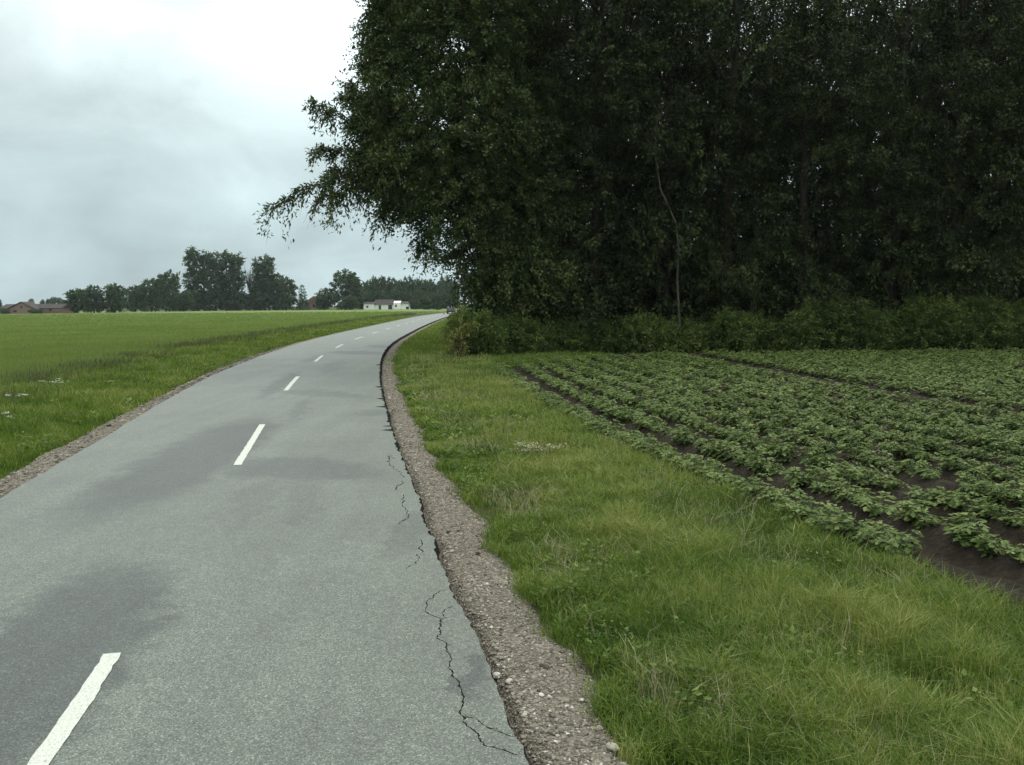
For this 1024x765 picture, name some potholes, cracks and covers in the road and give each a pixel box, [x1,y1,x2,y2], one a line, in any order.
crack [425,590,517,755]
crack [387,455,409,524]
